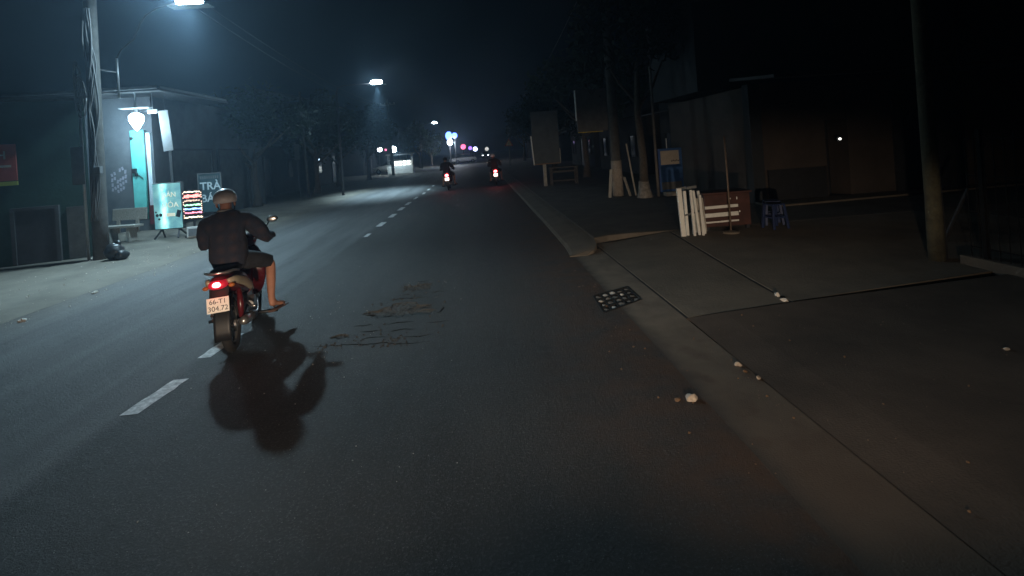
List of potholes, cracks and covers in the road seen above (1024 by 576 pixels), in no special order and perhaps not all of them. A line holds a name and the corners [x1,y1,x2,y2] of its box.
drain grate [593,286,642,313]
crack [315,281,449,347]
